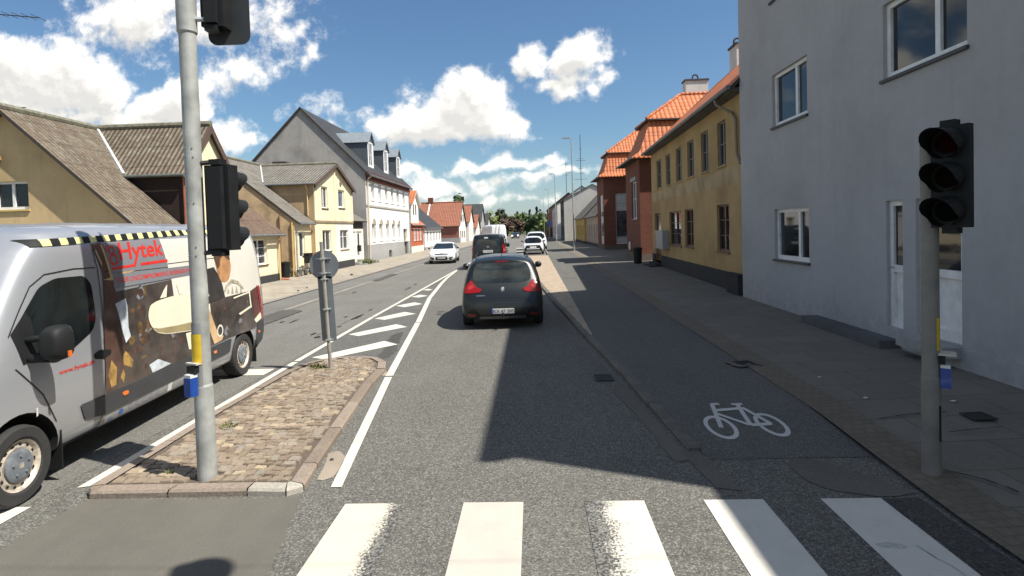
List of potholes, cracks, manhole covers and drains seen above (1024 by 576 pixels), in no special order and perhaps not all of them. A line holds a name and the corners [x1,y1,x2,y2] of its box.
manhole cover [959,411,998,420]
crack [945,470,1019,492]
